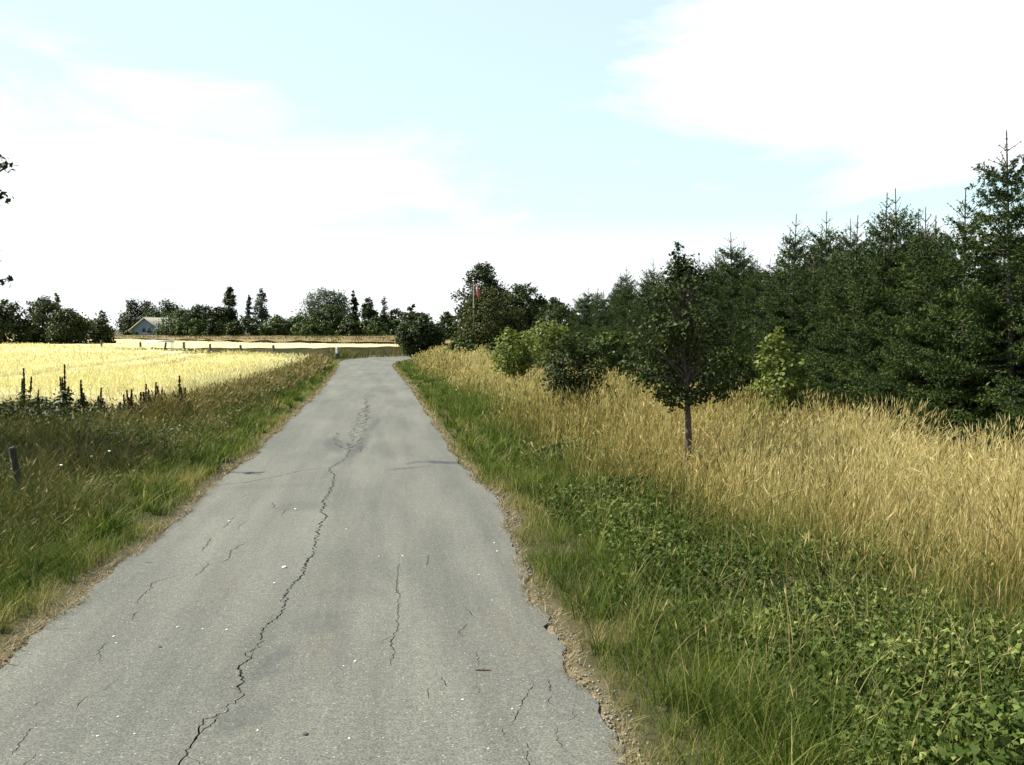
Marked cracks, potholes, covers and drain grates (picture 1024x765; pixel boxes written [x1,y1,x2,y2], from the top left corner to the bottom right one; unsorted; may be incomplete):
crack [382,563,403,664]
crack [178,398,371,765]
crack [502,676,576,765]
